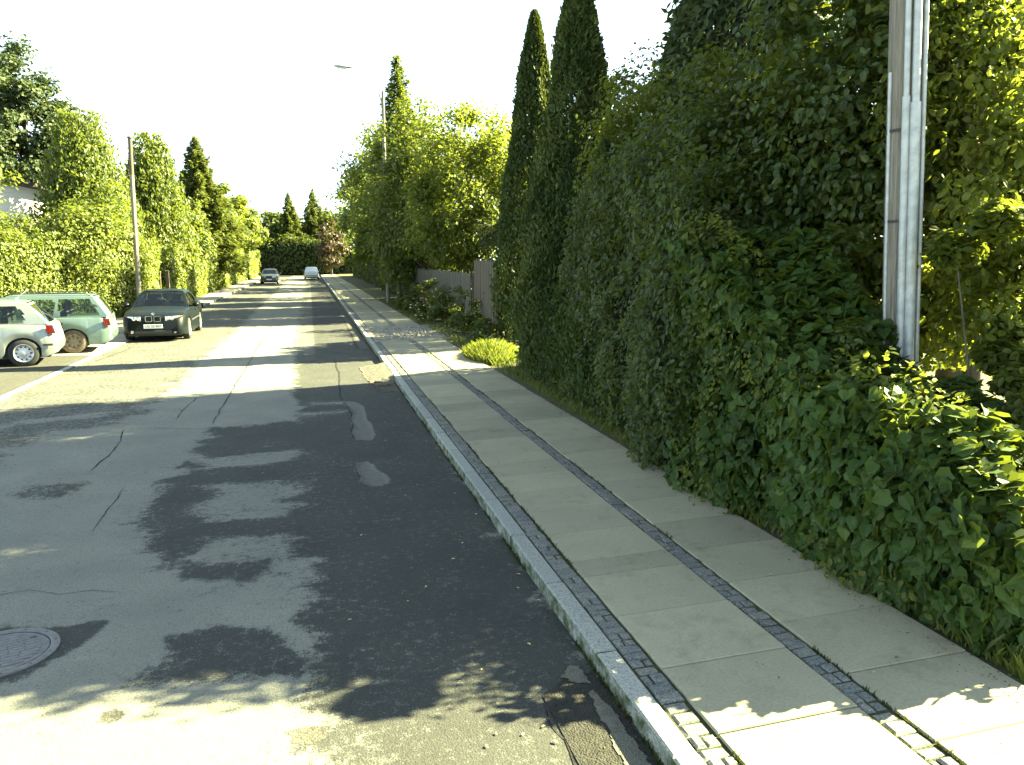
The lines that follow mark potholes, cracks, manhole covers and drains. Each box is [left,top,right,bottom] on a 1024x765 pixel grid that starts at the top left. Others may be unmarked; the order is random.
crack [90,339,263,471]
crack [334,359,355,440]
manhole cover [0,628,61,677]
